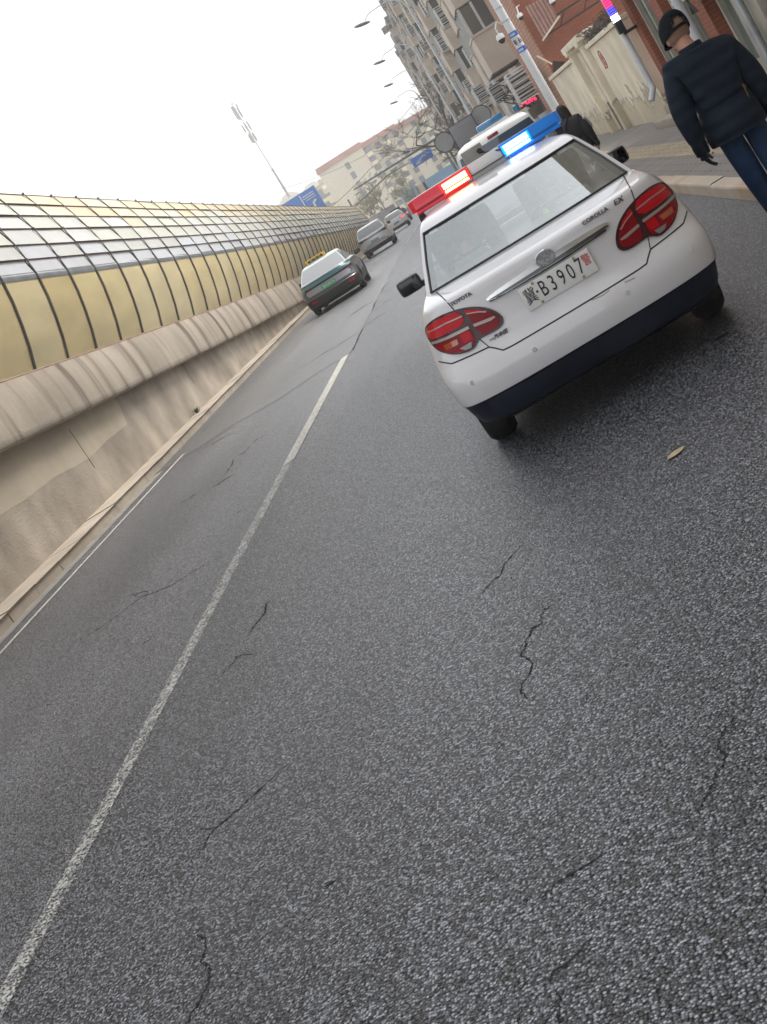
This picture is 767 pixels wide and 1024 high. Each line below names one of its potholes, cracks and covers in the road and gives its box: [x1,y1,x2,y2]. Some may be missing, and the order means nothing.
crack [186,924,211,1024]
crack [545,945,589,1024]
crack [198,767,283,859]
crack [78,556,221,641]
crack [697,713,734,819]
crack [181,430,261,503]
crack [519,606,549,701]
crack [521,839,620,902]
